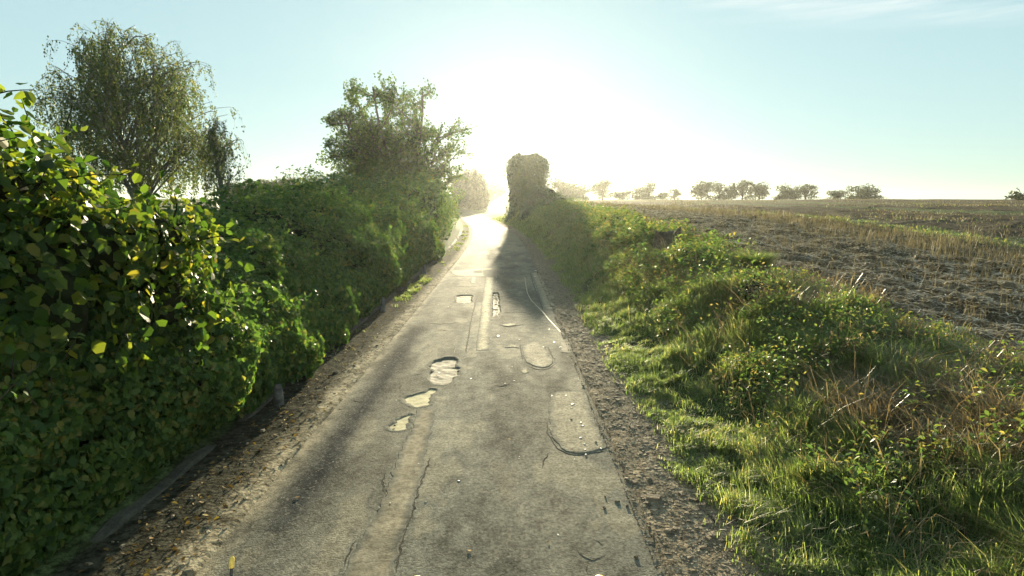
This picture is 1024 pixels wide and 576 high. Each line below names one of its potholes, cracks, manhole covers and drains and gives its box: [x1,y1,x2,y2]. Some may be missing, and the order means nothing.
crack [344,459,430,572]
crack [542,423,607,468]
pothole [425,356,464,386]
pothole [490,292,503,317]
pothole [398,387,441,409]
pothole [453,295,475,304]
pothole [383,412,416,433]
